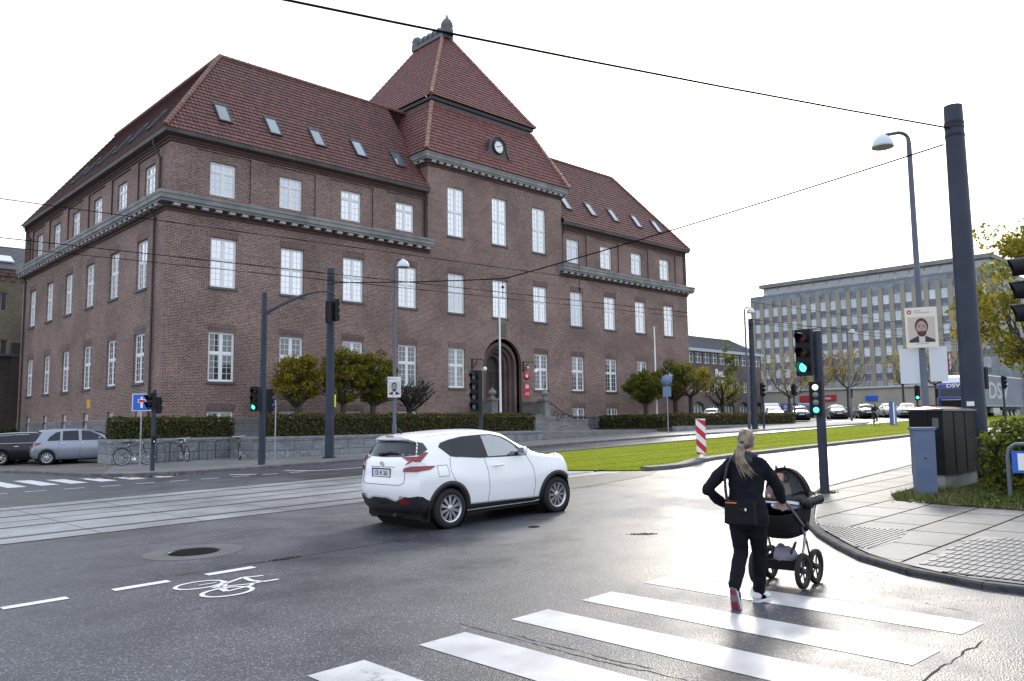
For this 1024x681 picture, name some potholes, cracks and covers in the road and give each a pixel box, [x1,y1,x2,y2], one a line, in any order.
manhole cover [141,544,243,561]
crack [922,641,982,681]
